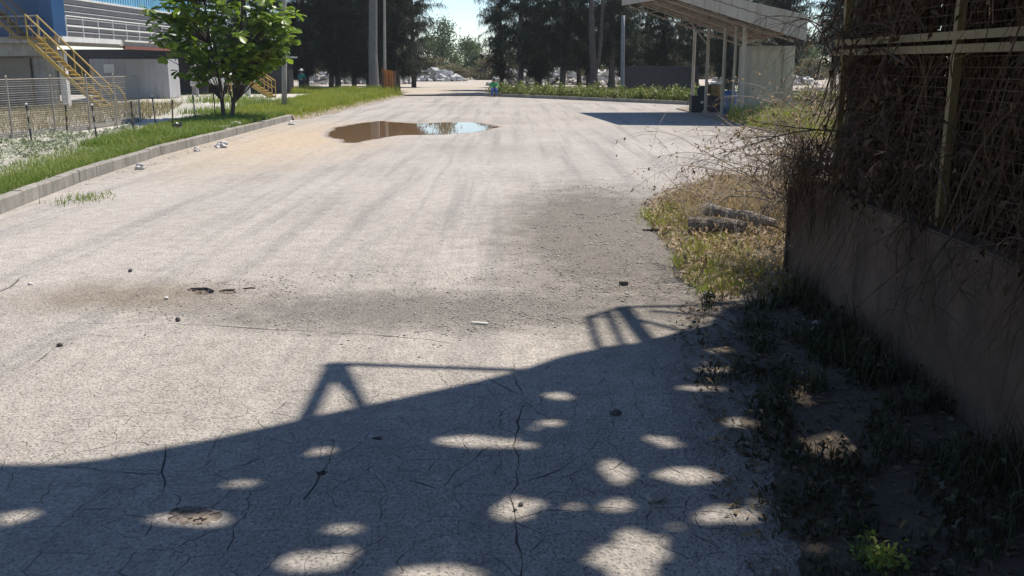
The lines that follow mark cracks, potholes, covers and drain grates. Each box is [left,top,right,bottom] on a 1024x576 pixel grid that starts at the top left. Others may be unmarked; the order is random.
pothole [167,506,222,526]
crack [1,353,802,576]
pothole [187,287,214,295]
